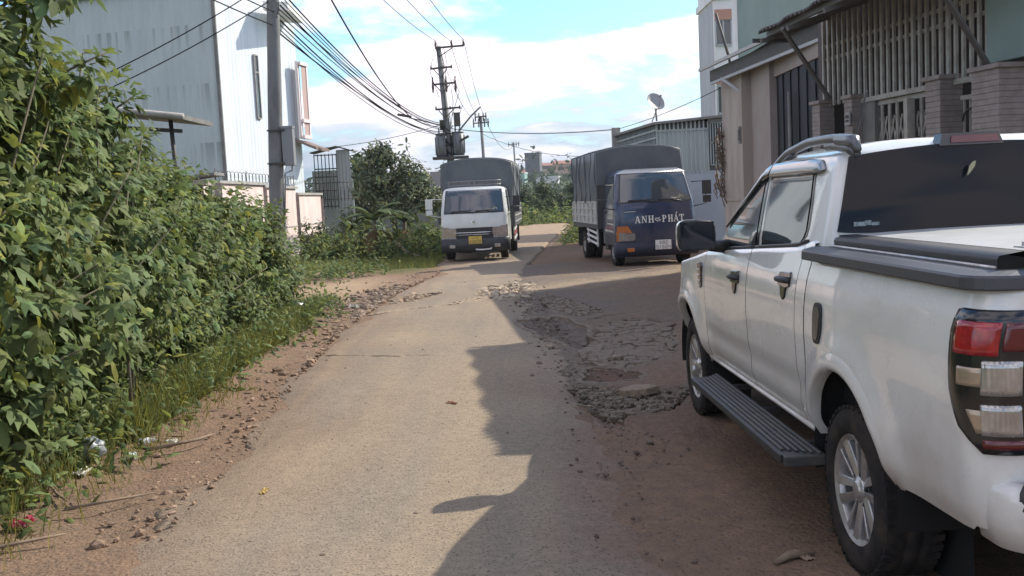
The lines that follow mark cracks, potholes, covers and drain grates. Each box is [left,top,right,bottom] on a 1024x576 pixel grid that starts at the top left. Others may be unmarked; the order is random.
crack [539,297,689,425]
pothole [471,282,536,301]
pothole [577,366,647,384]
pothole [513,314,608,356]
